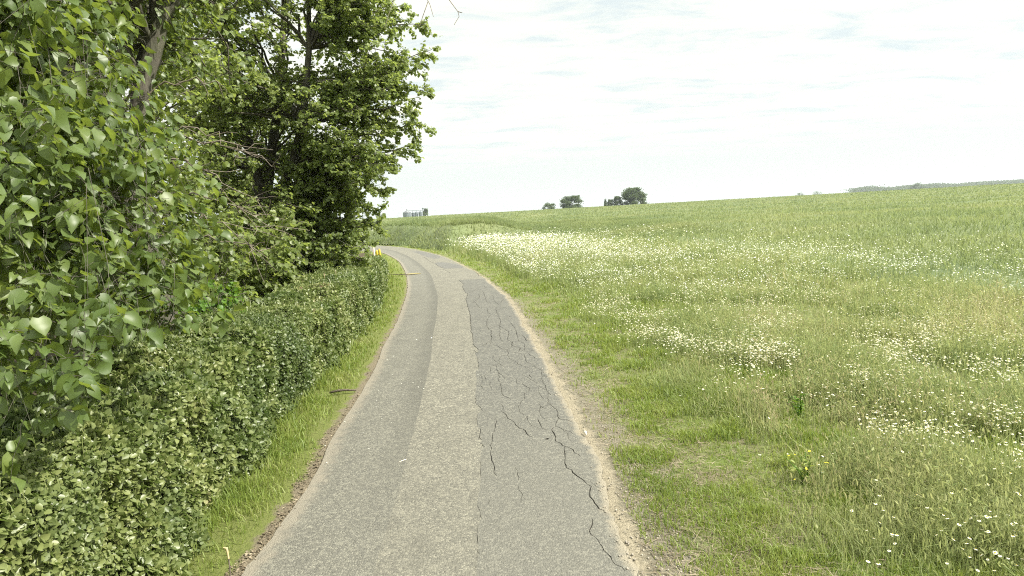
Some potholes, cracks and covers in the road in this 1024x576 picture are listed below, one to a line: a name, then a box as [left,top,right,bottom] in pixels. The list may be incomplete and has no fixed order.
crack [472,287,624,569]
